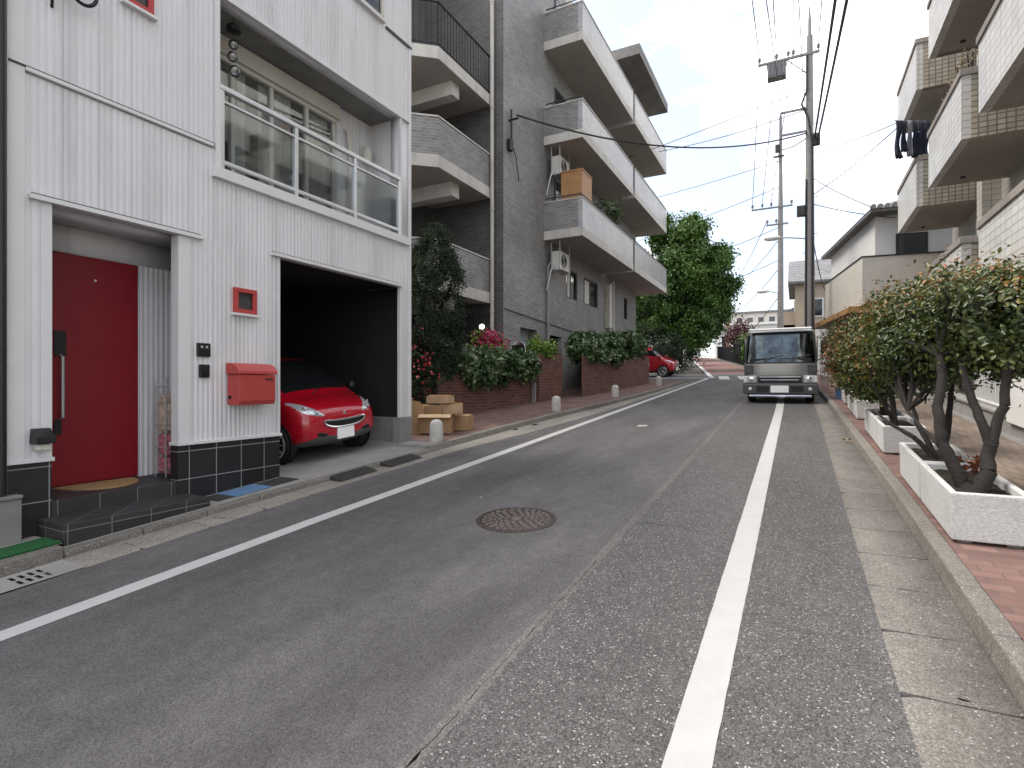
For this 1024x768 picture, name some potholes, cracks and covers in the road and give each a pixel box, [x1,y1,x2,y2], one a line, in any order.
manhole cover [476,507,557,533]
